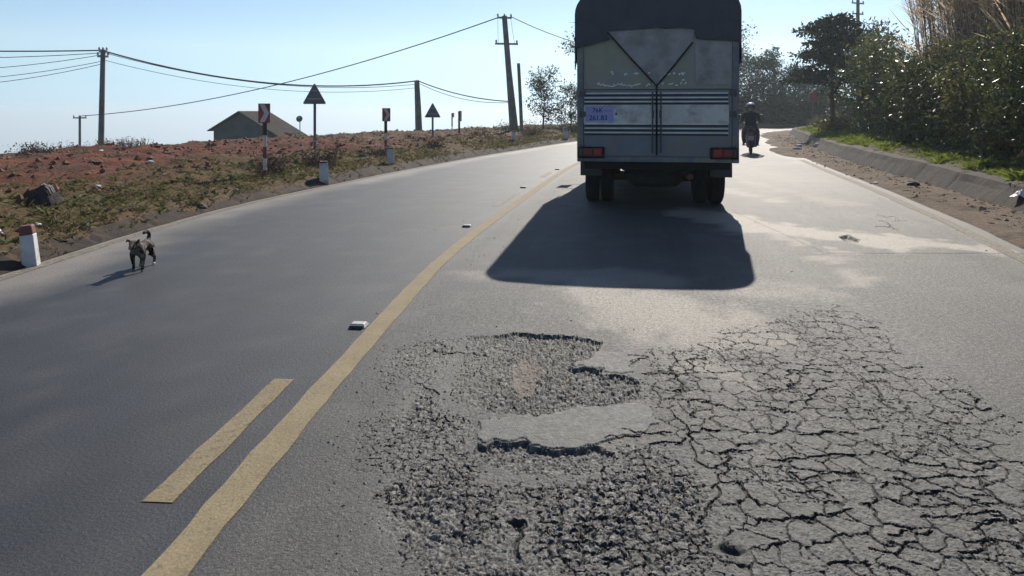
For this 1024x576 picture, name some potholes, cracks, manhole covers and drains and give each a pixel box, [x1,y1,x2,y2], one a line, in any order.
crack [875,214,906,230]
pothole [449,332,642,417]
pothole [713,540,749,559]
crack [353,304,1024,576]
pothole [838,234,861,243]
pothole [473,440,616,470]
